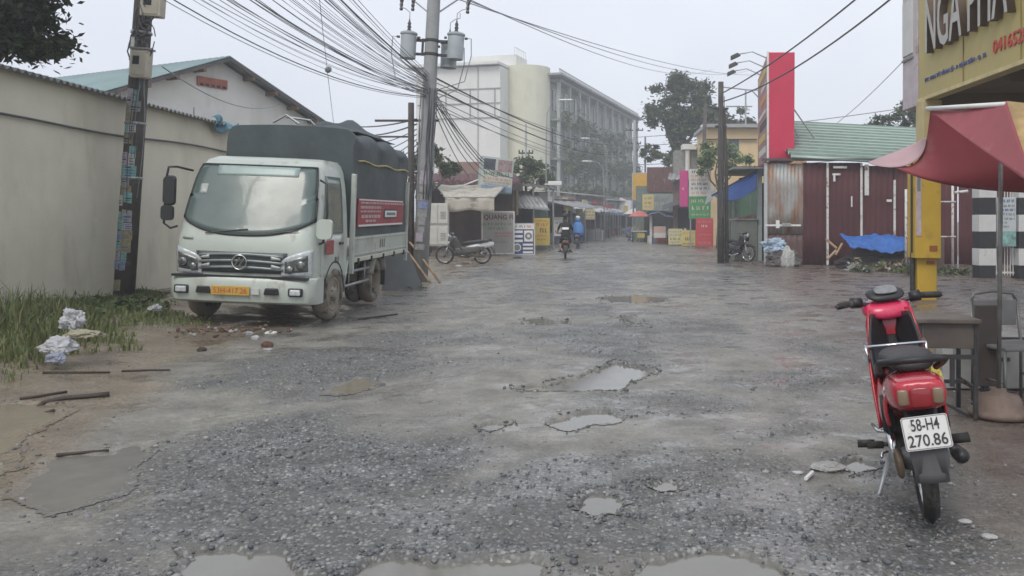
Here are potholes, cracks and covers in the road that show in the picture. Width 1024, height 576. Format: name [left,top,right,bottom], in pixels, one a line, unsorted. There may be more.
pothole [565,484,641,524]
pothole [596,294,673,303]
pothole [585,540,818,576]
pothole [319,374,385,396]
pothole [473,418,518,435]
pothole [622,475,701,496]
pothole [332,544,579,576]
pothole [152,533,349,576]
pothole [518,317,572,325]
pothole [503,358,662,392]
pothole [831,452,885,478]
pothole [545,408,638,433]
